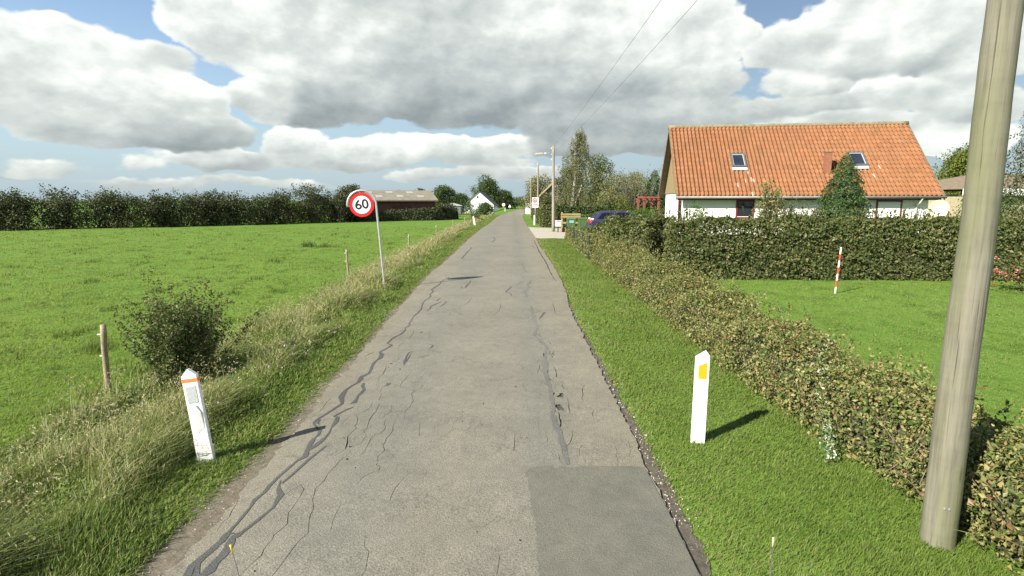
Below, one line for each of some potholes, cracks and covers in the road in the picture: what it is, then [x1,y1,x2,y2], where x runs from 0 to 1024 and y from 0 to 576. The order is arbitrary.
crack [255,332,430,576]
crack [523,303,594,465]
